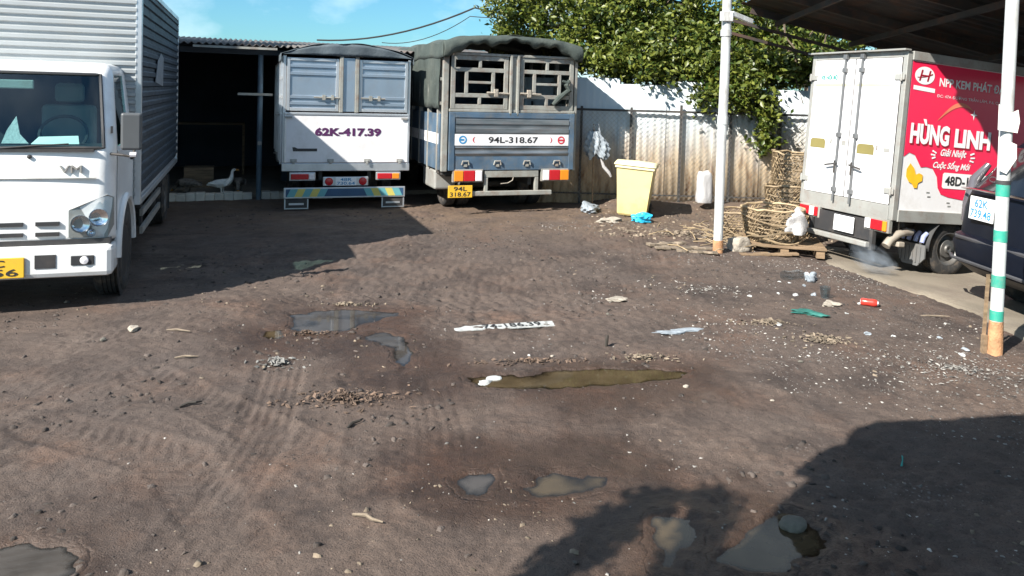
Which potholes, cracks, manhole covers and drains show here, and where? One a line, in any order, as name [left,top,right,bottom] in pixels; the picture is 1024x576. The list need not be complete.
pothole [0,531,91,576]
pothole [445,464,503,501]
pothole [458,365,694,393]
pothole [354,330,421,376]
pothole [284,307,407,334]
pothole [706,504,841,576]
pothole [640,506,711,576]
pothole [506,464,620,502]
